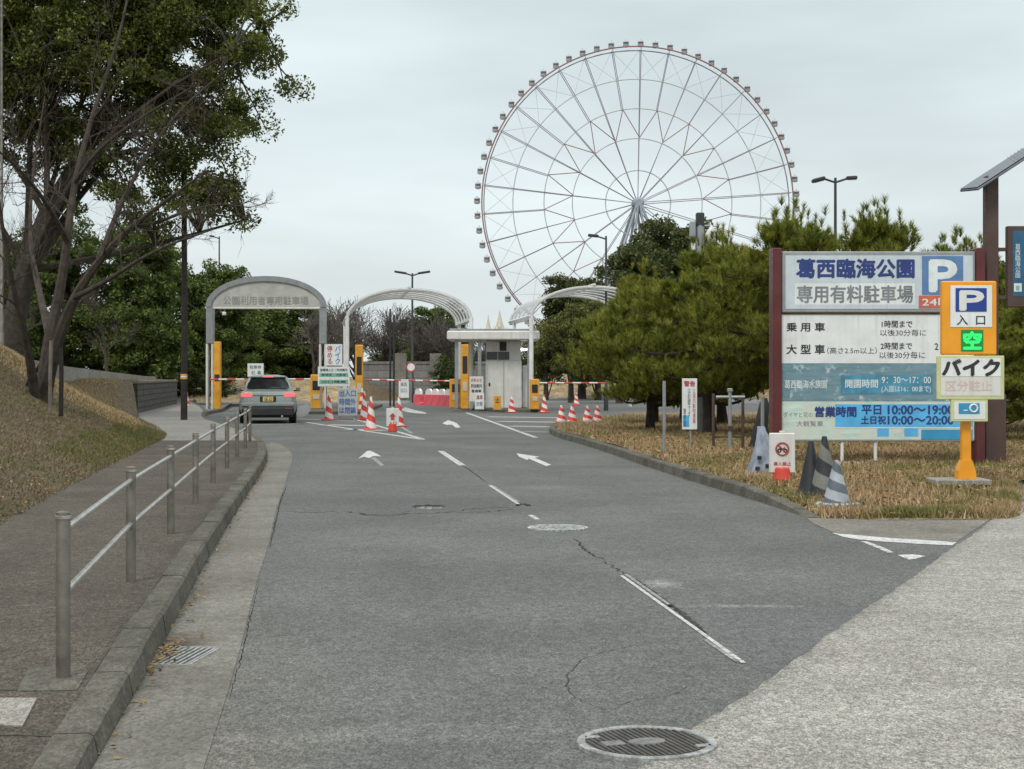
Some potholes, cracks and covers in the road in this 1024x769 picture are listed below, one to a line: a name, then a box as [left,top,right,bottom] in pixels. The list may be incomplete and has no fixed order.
drain grate [151,646,221,665]
crack [270,486,513,547]
crack [565,539,708,711]
manhole cover [577,725,717,763]
